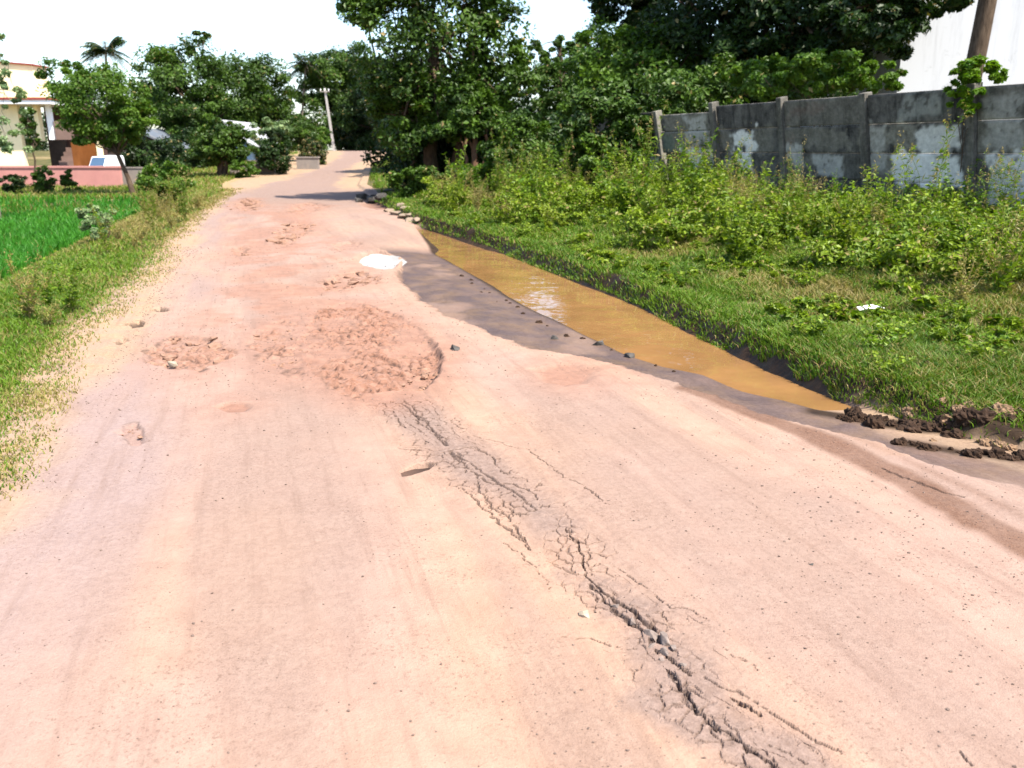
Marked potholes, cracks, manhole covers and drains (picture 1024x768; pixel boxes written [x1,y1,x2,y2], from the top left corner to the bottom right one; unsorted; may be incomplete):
pothole [133,333,244,374]
pothole [299,301,455,404]
pothole [303,271,396,292]
crack [346,389,873,768]
pothole [261,220,325,250]
pothole [237,317,320,387]
pothole [199,398,264,416]
crack [862,462,987,506]
